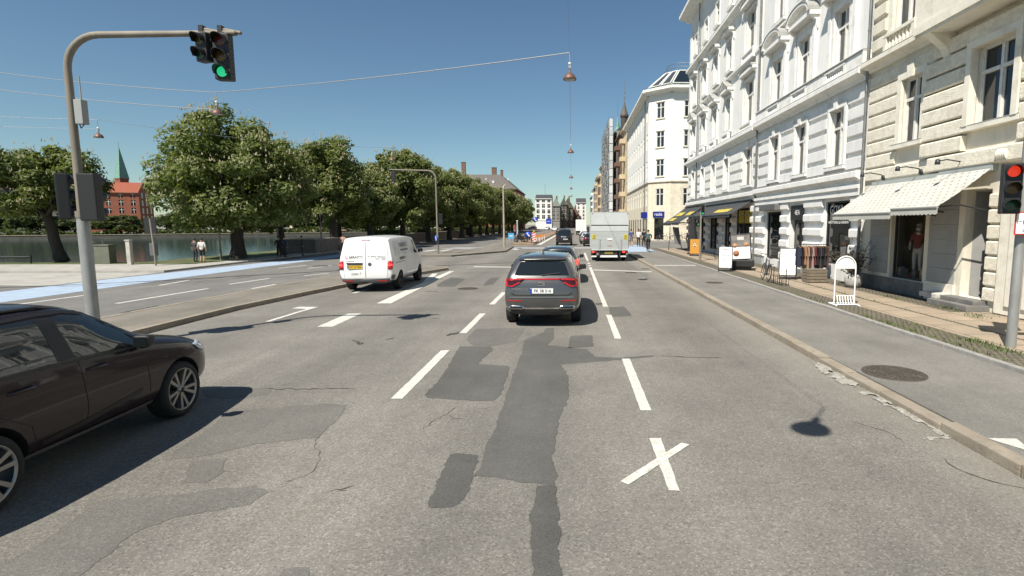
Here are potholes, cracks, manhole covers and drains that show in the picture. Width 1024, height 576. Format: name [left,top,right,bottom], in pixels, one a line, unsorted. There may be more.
manhole cover [861,365,928,382]
